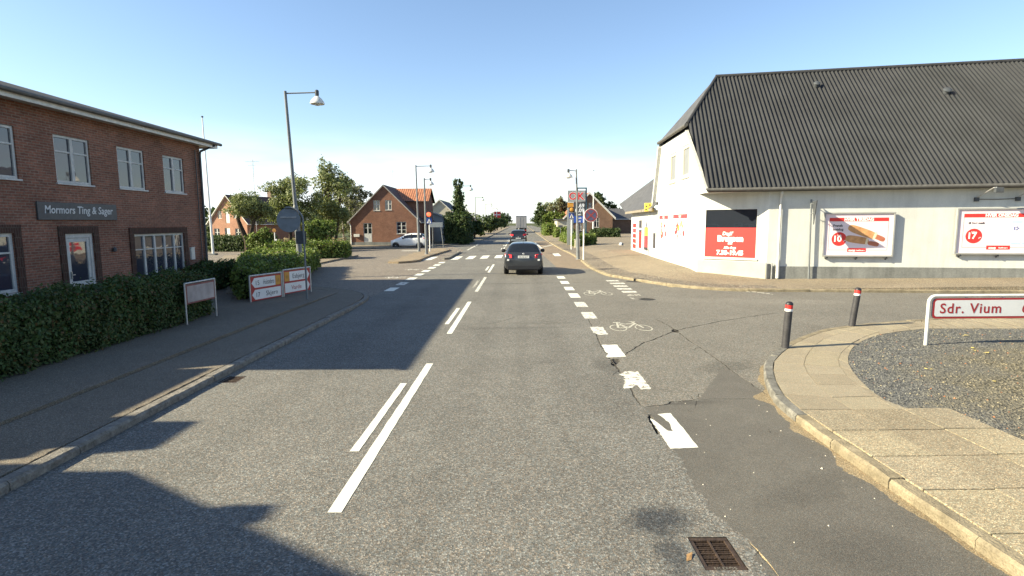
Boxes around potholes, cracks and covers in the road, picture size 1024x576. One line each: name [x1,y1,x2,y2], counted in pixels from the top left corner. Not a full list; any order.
drain grate [687,537,748,570]
crack [588,313,772,412]
